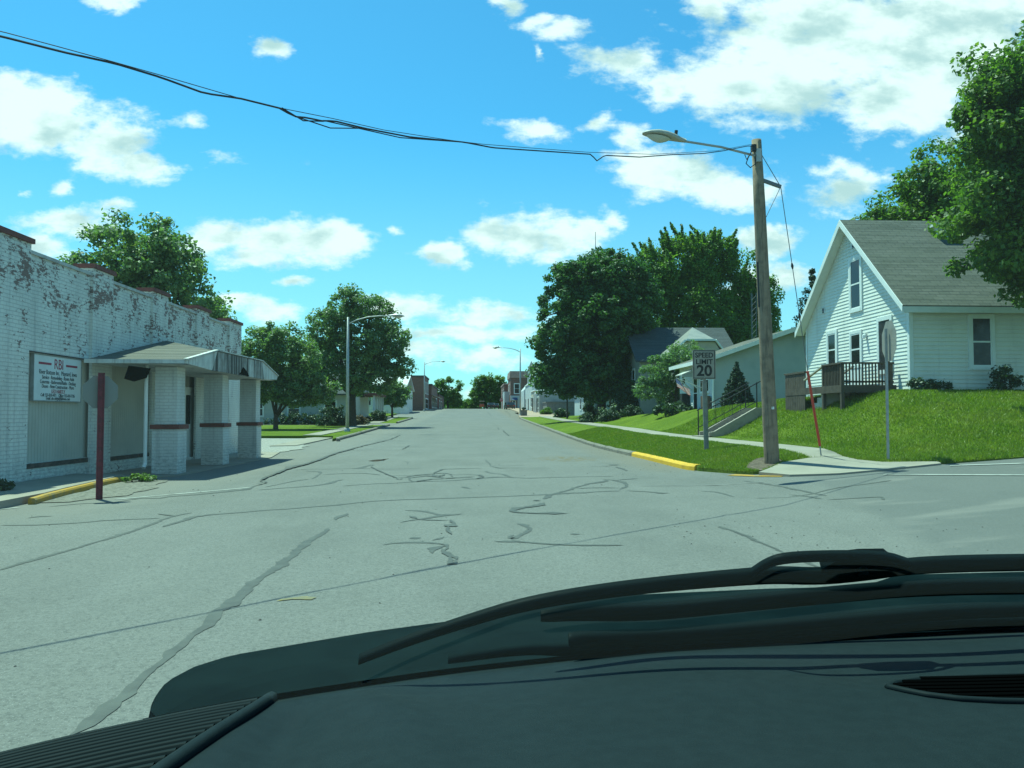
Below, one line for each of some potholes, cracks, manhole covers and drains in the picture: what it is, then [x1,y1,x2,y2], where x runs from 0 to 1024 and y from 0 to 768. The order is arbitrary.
crack [779,480,890,500]
crack [30,435,664,525]
